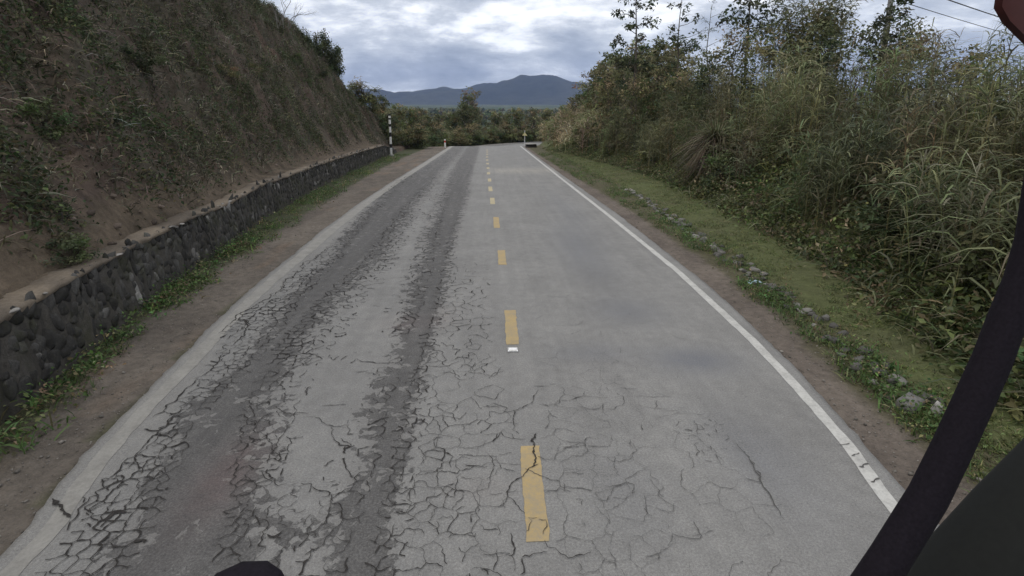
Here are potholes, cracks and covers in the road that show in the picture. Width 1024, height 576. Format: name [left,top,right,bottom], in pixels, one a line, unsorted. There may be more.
crack [293,181,794,576]
crack [219,173,443,366]
crack [212,357,318,567]
crack [37,332,279,576]
